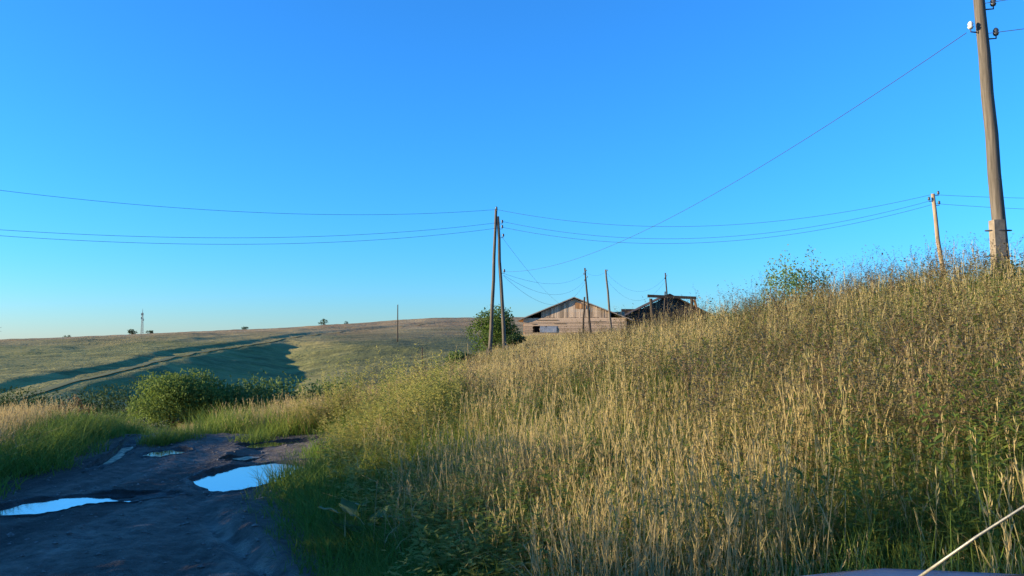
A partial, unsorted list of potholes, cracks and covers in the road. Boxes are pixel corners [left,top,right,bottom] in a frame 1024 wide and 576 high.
pothole [0,488,193,518]
pothole [138,445,196,458]
pothole [216,454,265,462]
pothole [180,458,315,496]
pothole [82,434,146,471]
